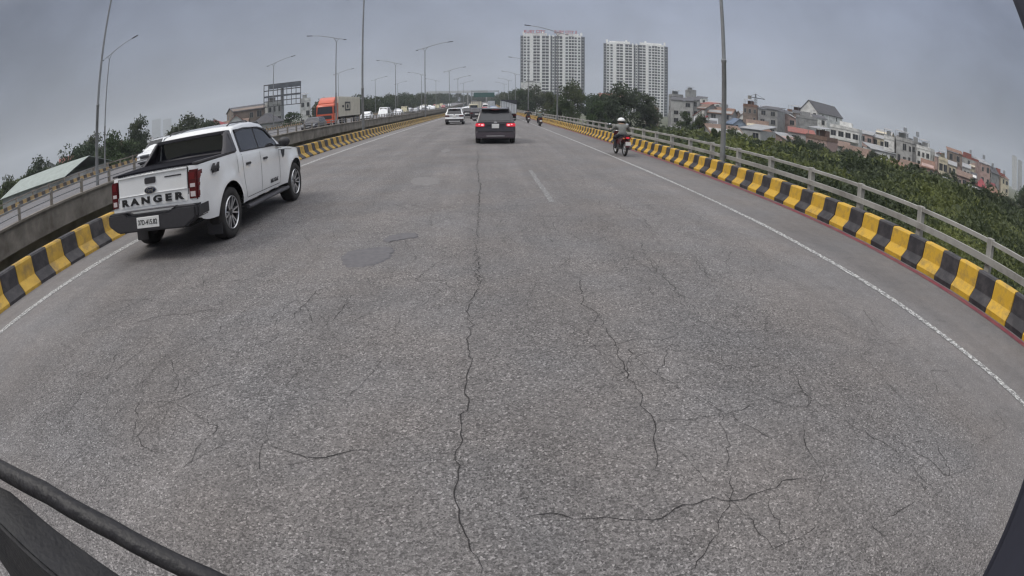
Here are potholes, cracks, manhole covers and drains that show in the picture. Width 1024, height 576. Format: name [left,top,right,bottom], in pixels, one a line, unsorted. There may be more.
crack [2,153,483,573]
crack [492,201,1007,568]
